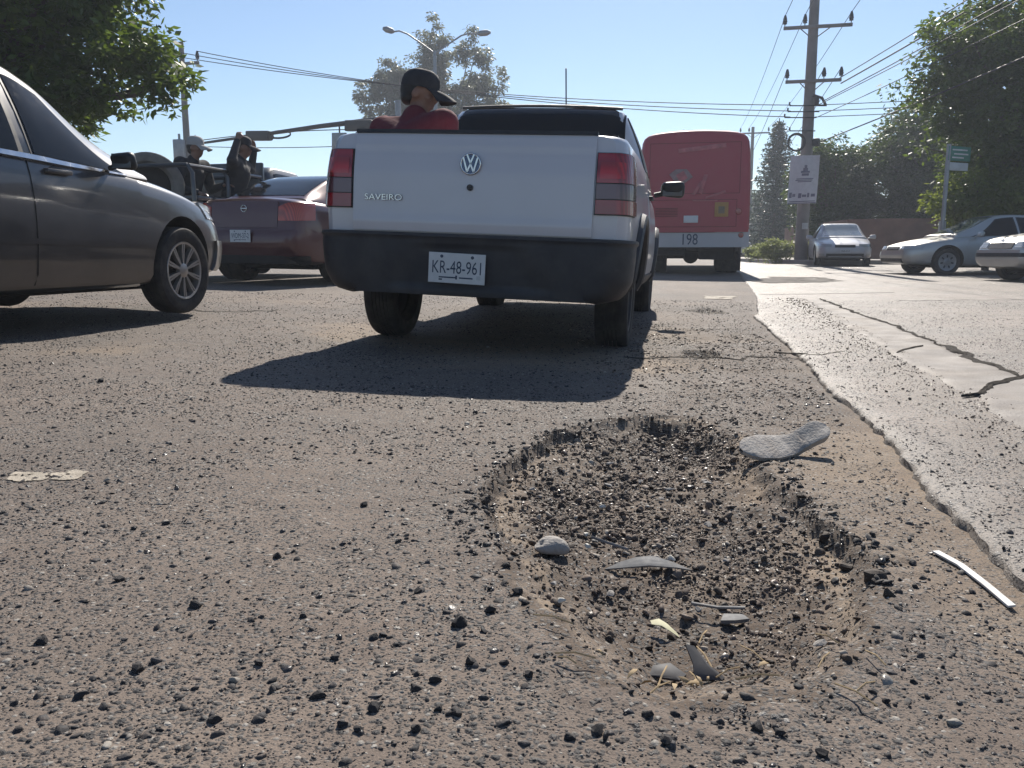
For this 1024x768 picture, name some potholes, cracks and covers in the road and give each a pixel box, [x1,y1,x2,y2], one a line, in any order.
pothole [474,412,897,715]
crack [940,344,1024,397]
crack [624,351,843,361]
